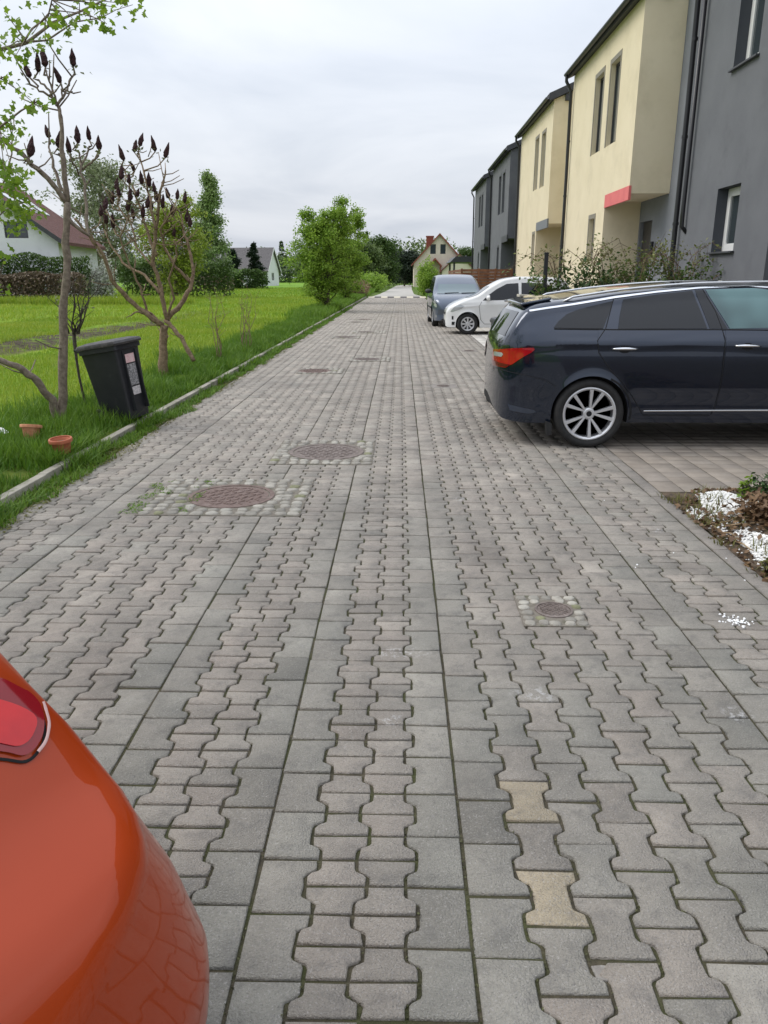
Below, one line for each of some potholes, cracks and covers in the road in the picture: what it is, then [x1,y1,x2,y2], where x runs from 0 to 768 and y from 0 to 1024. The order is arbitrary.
manhole cover [267,440,375,466]
manhole cover [135,479,315,517]
utility cover [513,595,590,629]
